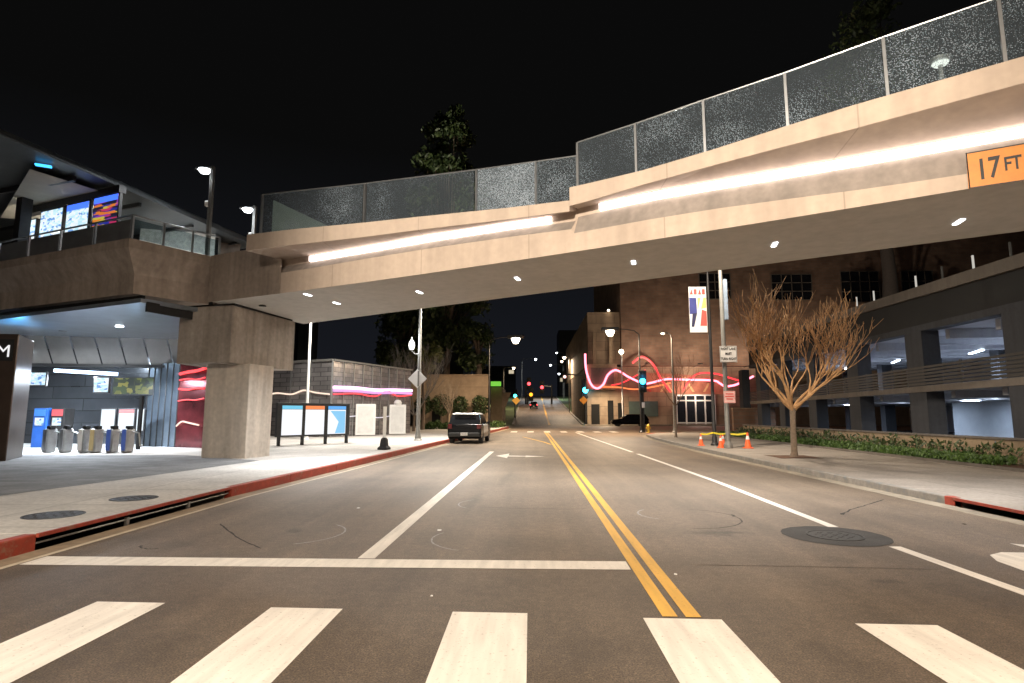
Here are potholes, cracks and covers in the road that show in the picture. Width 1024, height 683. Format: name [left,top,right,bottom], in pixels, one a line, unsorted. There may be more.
crack [220,524,262,549]
drain grate [951,497,1024,514]
manhole cover [20,510,86,520]
crack [692,509,743,529]
drain grate [0,486,233,550]
manhole cover [781,526,894,547]
